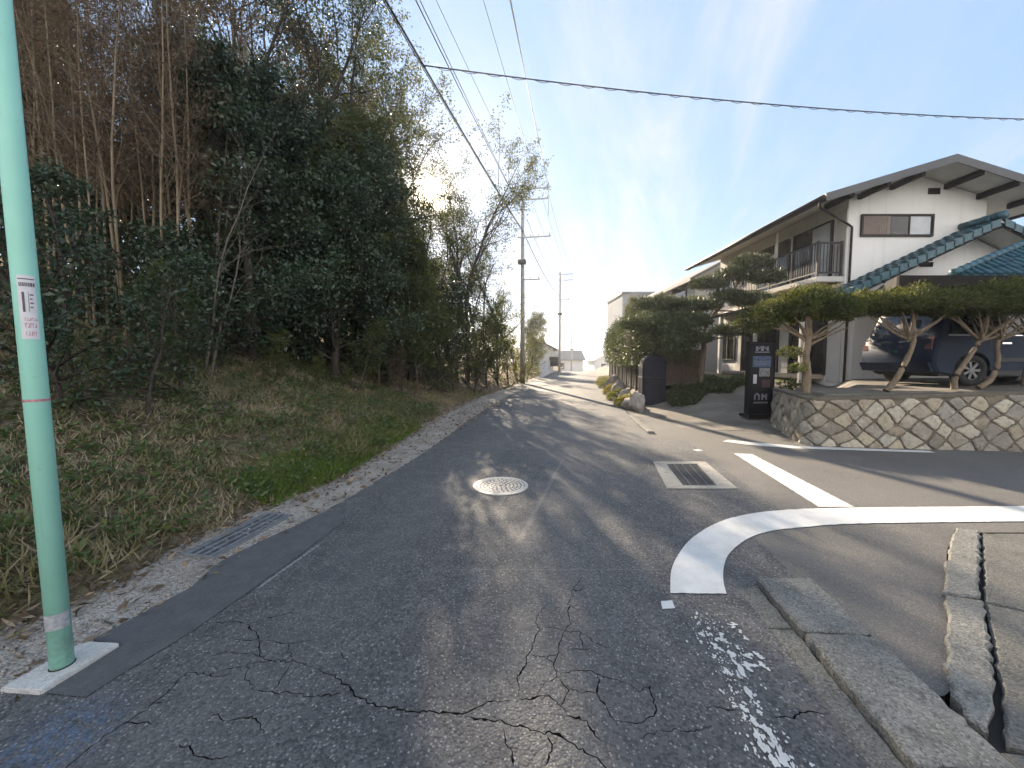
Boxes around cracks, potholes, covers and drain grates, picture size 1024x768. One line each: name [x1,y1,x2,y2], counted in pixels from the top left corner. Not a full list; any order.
crack [775,710,825,719]
crack [209,580,734,768]
drain grate [181,512,293,559]
manhole cover [473,477,528,496]
drain grate [653,461,738,489]
